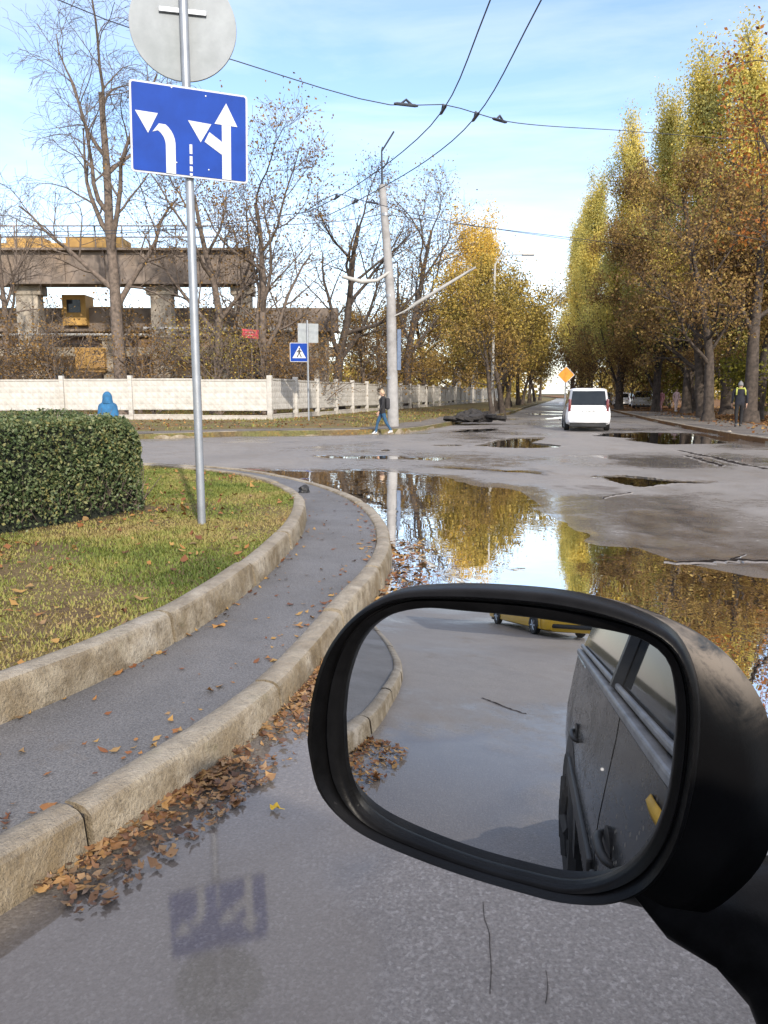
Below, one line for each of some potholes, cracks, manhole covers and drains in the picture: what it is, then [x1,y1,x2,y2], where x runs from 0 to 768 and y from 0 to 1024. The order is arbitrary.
crack [483,904,492,992]
crack [664,554,768,565]
pothole [471,437,564,449]
pothole [596,474,714,488]
crack [676,450,768,469]
